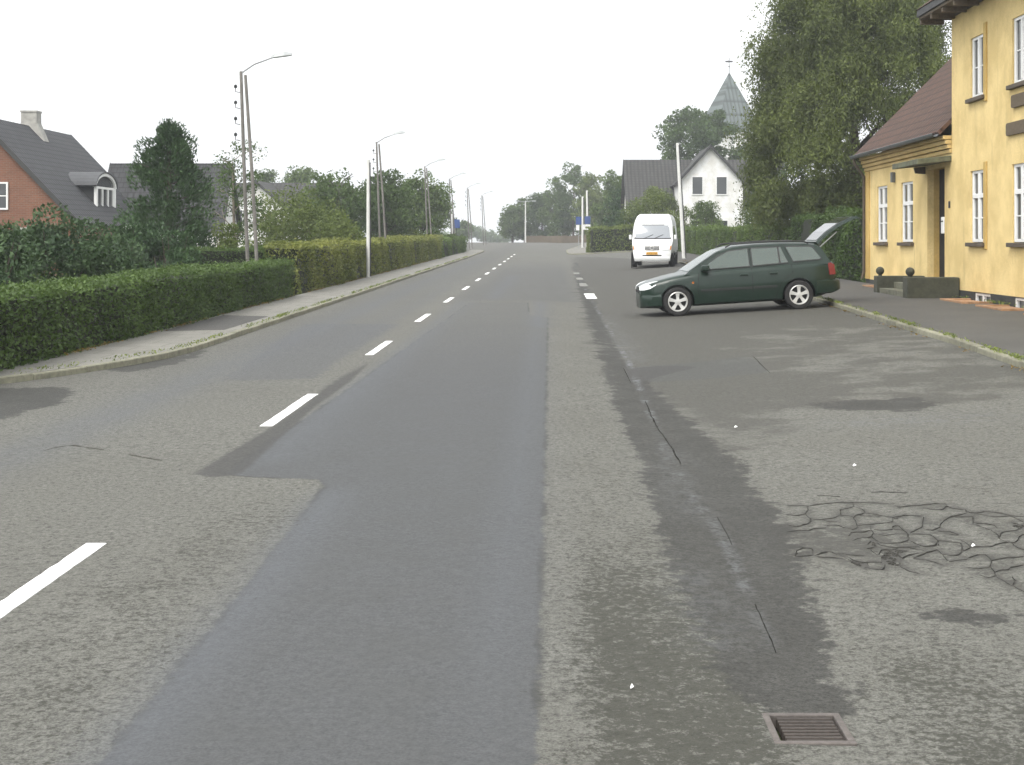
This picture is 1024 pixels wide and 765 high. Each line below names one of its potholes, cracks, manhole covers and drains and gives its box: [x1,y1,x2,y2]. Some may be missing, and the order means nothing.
crack [645,401,681,465]
crack [789,491,1024,592]
crack [755,604,776,653]
drain grate [761,713,857,746]
